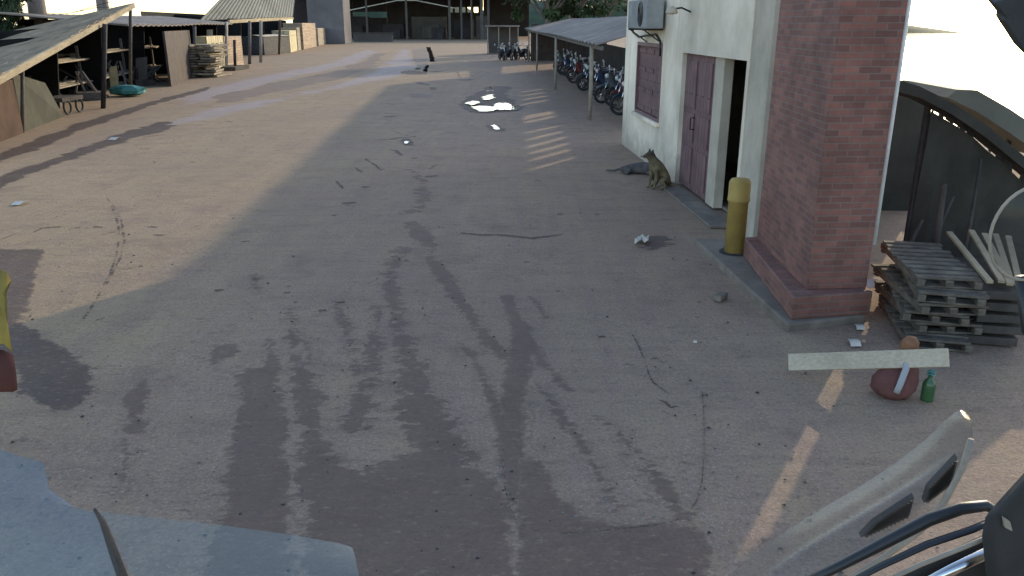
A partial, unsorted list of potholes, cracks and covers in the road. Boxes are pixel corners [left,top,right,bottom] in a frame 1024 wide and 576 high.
crack [629,331,680,417]
